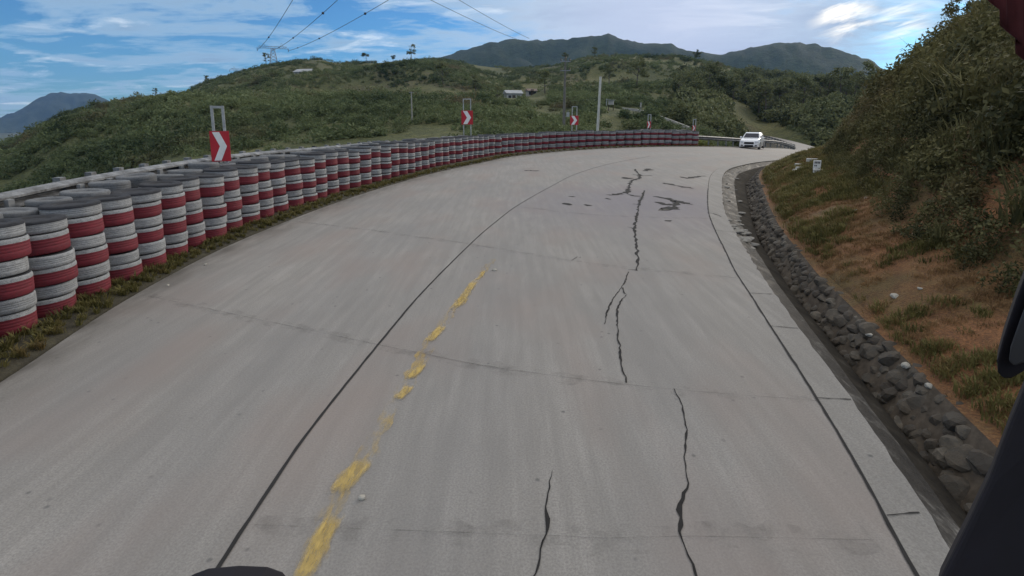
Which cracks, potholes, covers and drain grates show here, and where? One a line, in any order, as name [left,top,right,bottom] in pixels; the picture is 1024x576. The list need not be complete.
crack [533,474,552,576]
crack [562,169,701,383]
crack [674,389,698,576]
